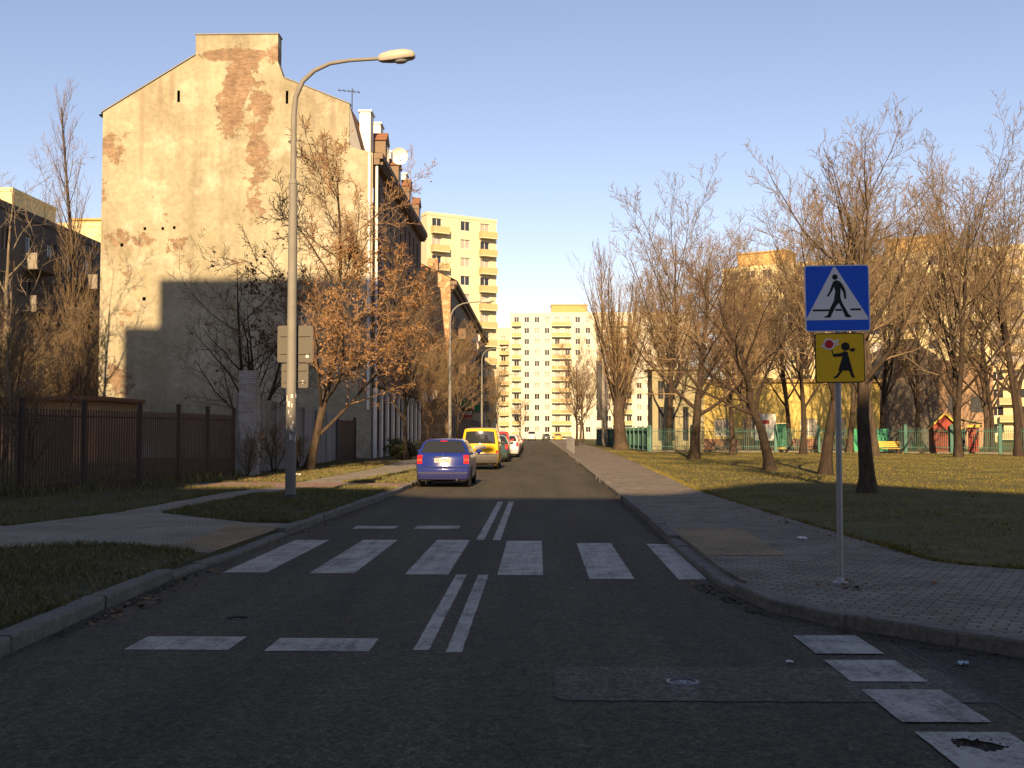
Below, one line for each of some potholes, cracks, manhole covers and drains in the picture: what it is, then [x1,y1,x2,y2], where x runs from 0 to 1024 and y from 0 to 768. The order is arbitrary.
pothole [951,736,1009,752]
manhole cover [666,677,699,685]
